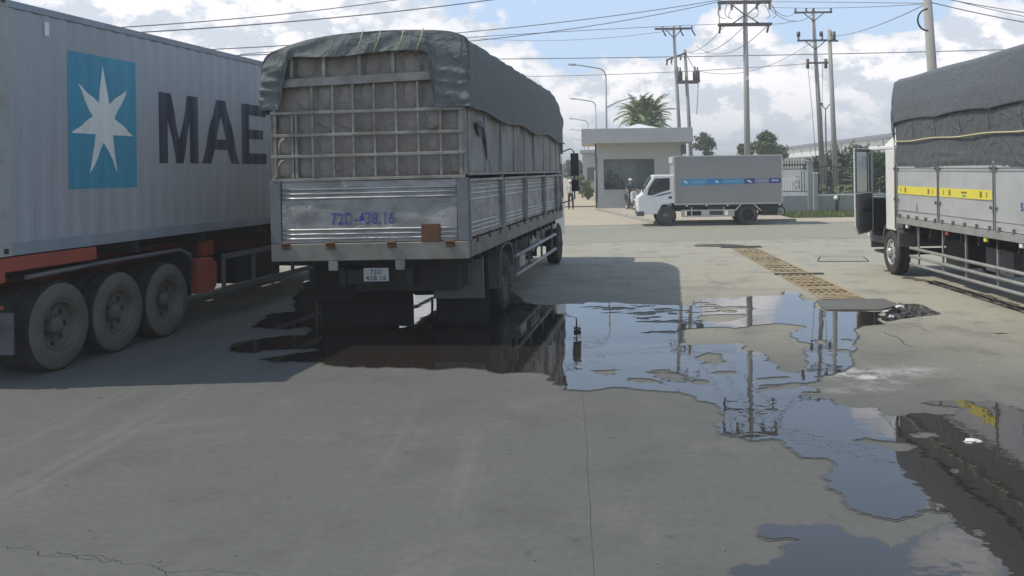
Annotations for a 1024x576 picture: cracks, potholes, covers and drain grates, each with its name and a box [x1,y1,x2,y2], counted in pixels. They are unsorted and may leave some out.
drain grate [731,247,810,273]
pothole [881,302,941,322]
crack [7,546,260,576]
drain grate [779,274,865,300]
